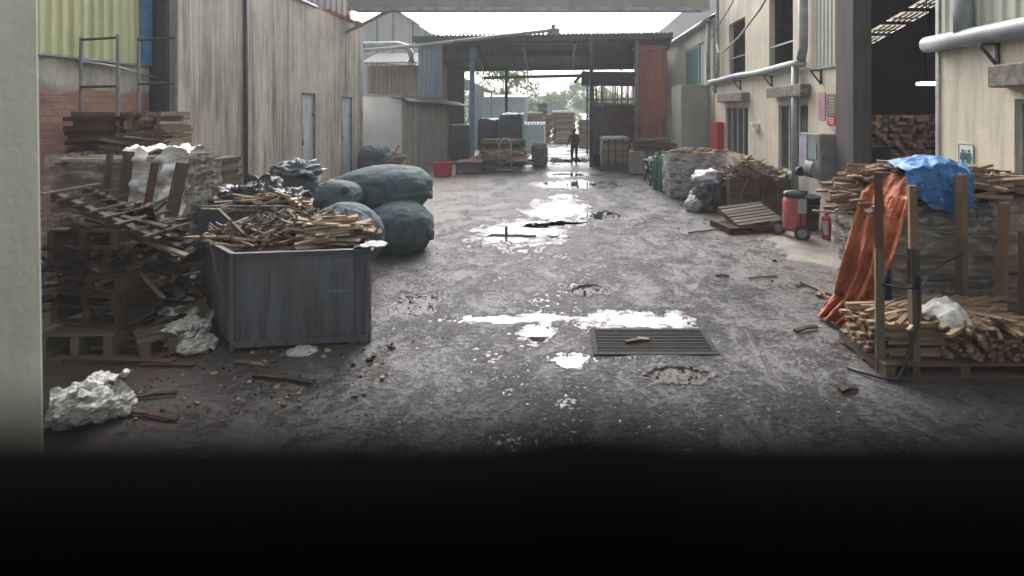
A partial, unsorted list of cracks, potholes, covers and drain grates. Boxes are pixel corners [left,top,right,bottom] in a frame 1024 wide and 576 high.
pothole [387,294,442,316]
drain grate [590,328,720,356]
pothole [639,365,718,386]
pothole [590,210,624,222]
pothole [568,283,612,297]
